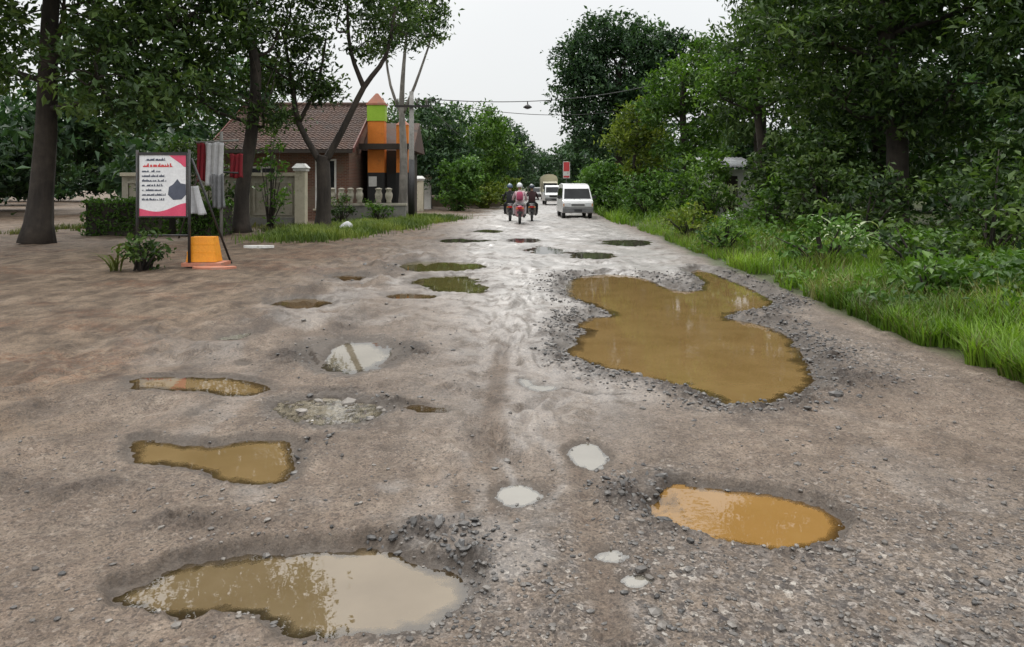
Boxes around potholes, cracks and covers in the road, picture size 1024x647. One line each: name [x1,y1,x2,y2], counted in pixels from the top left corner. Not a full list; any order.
pothole [258,388,401,431]
pothole [635,469,859,551]
pothole [402,271,501,294]
pothole [544,263,843,408]
pothole [590,237,662,247]
pothole [111,371,282,398]
pothole [388,257,496,273]
pothole [258,292,347,311]
pothole [557,435,619,472]
pothole [91,524,497,645]
pothole [483,477,552,511]
pothole [400,397,458,413]
